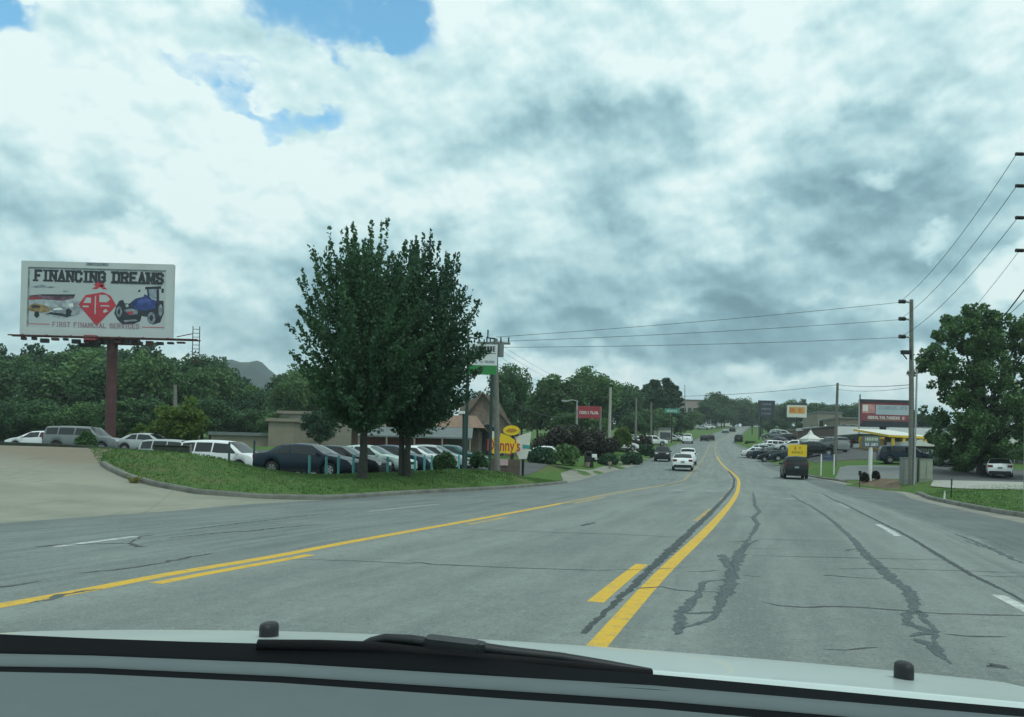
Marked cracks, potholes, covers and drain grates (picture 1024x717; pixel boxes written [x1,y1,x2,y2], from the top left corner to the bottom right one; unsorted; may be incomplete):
crack [301,559,714,572]
crack [0,535,211,603]
crack [765,602,1024,616]
